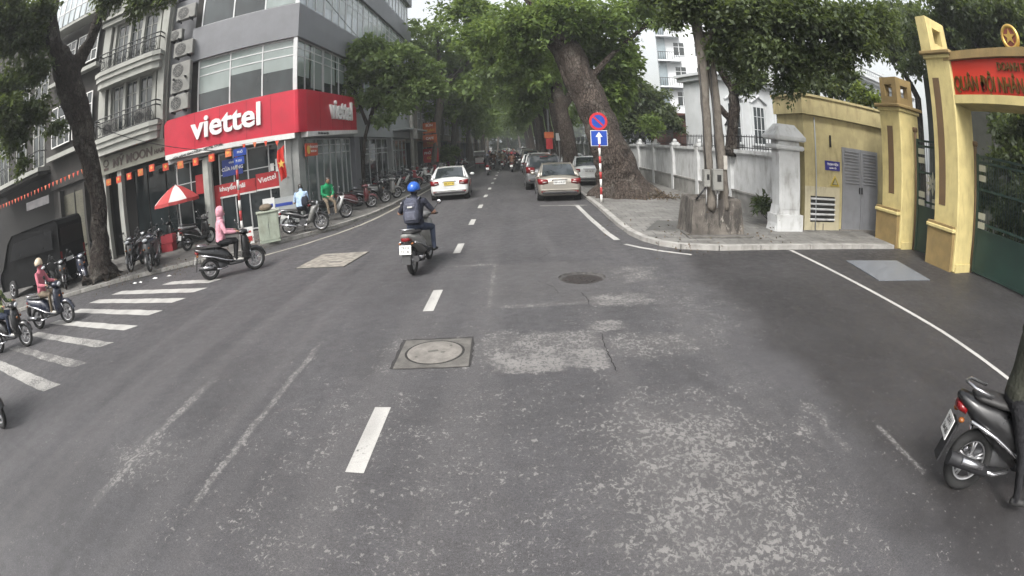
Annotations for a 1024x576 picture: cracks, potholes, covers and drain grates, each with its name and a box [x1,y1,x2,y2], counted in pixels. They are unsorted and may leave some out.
manhole cover [389,336,475,369]
manhole cover [558,272,606,284]
